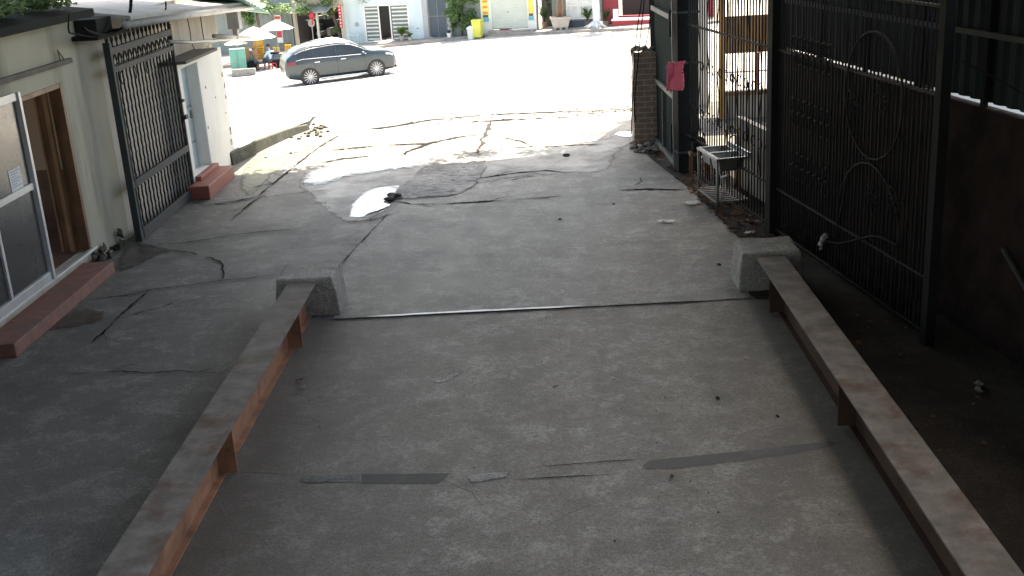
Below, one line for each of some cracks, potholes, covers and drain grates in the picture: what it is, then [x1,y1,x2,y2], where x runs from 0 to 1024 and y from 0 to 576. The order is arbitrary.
crack [320,108,627,225]
crack [87,181,321,343]
crack [66,362,221,374]
crack [627,178,684,191]
